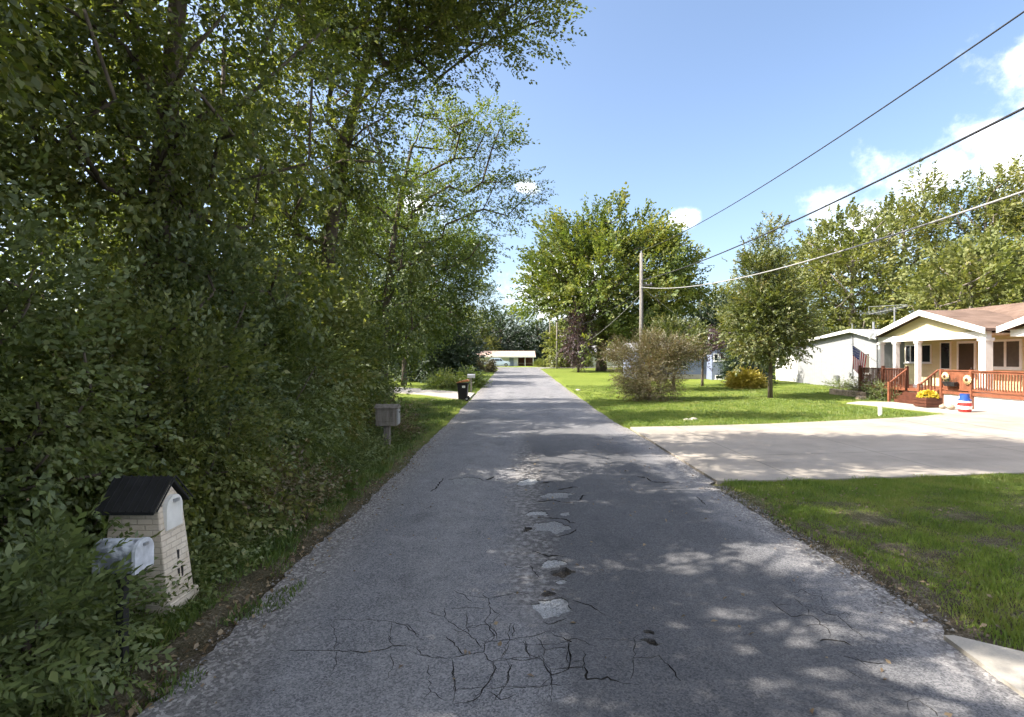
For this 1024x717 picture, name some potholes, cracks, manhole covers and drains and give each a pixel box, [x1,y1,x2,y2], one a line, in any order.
pothole [533,521,572,534]
pothole [550,567,576,578]
pothole [530,597,572,619]
crack [770,589,893,678]
pothole [541,559,567,569]
crack [290,590,681,704]
